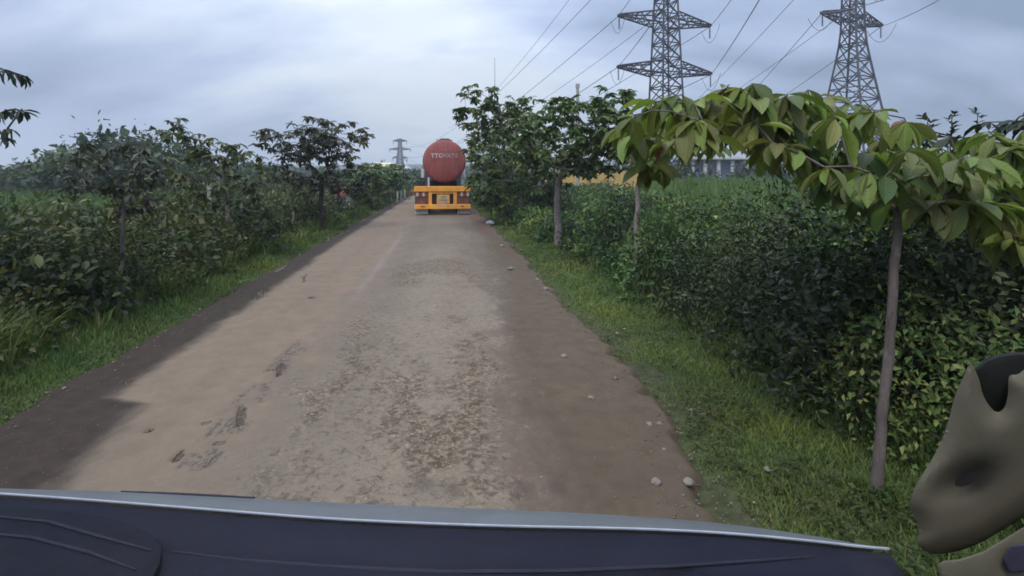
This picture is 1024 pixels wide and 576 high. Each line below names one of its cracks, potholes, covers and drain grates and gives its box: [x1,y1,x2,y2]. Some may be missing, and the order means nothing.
pothole [235,404,247,428]
